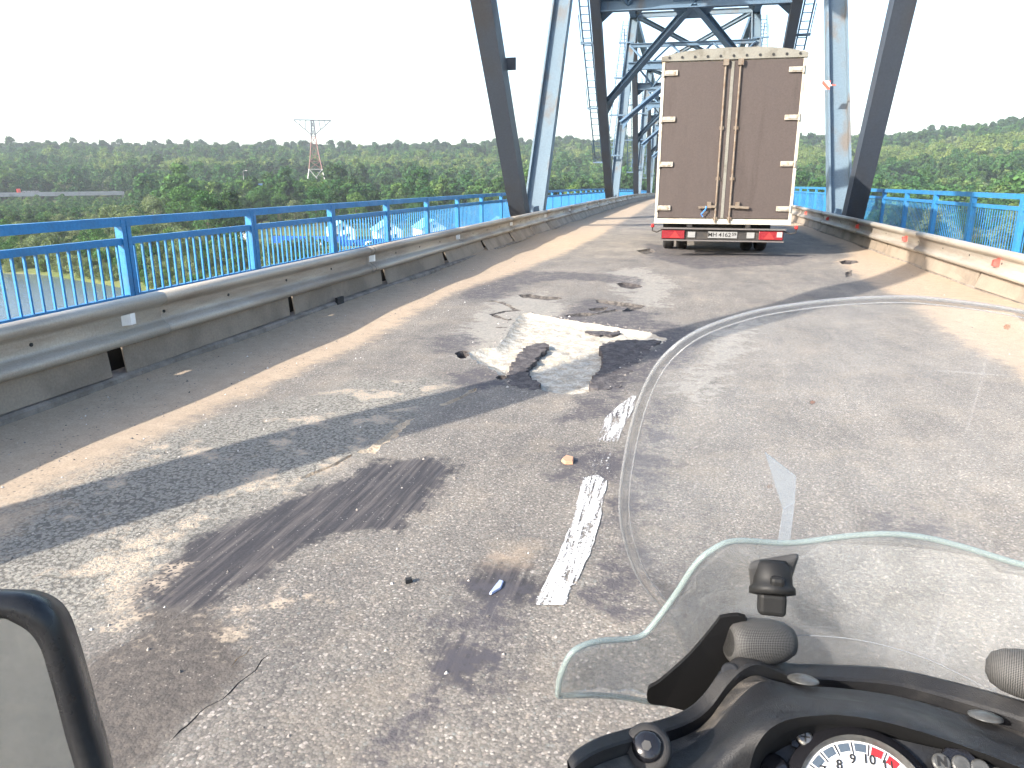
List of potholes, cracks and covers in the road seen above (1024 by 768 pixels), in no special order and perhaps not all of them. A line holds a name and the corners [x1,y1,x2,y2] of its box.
crack [173,649,268,739]
pothole [566,309,618,317]
pothole [596,300,645,312]
